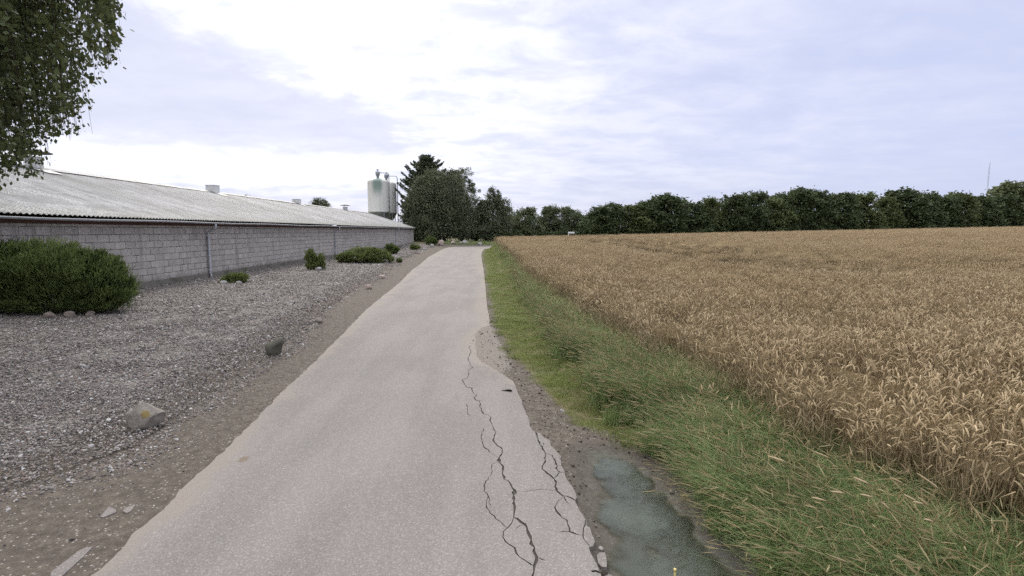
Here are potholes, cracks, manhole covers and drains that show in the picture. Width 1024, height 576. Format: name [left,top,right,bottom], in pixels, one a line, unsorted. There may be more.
crack [462,346,590,576]
